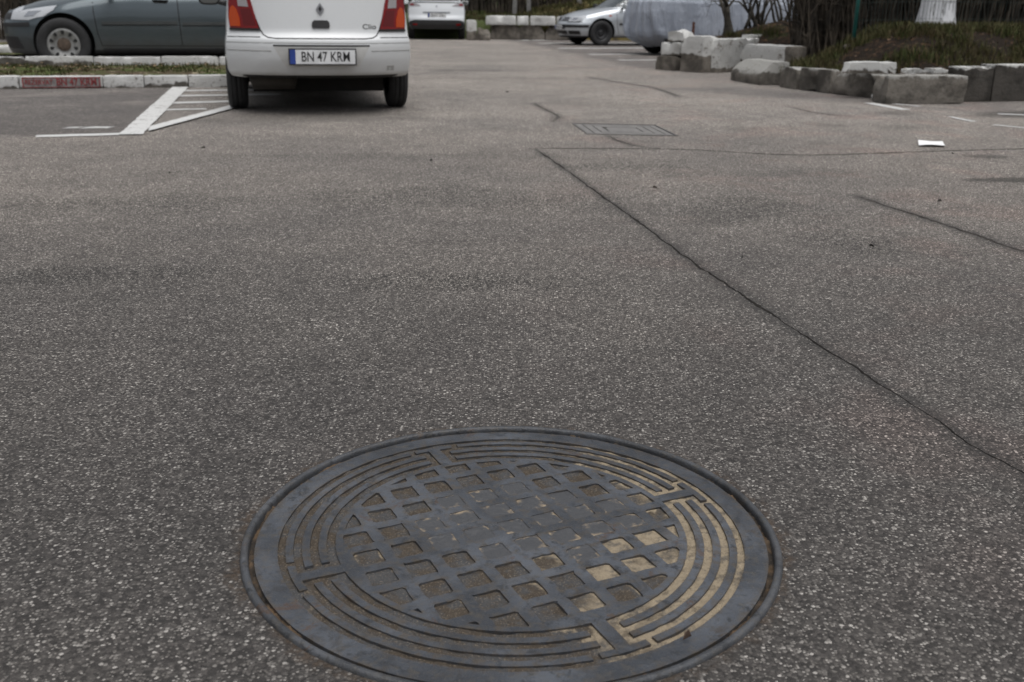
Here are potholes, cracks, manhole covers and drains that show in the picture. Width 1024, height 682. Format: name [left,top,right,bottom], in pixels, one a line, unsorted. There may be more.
manhole cover [240,426,783,682]
